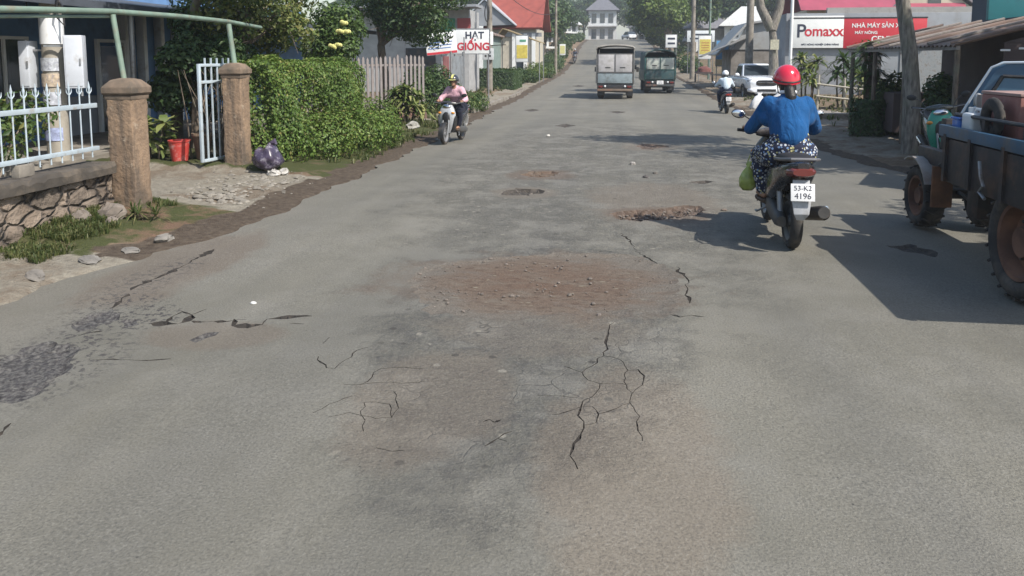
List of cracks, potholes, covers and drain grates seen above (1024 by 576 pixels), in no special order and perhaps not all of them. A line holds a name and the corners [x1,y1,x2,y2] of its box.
crack [313,337,423,452]
crack [673,267,704,317]
crack [483,419,512,446]
crack [546,323,645,469]
pothole [609,205,706,222]
pothole [502,188,545,196]
crack [151,309,309,328]
crack [112,249,214,308]
